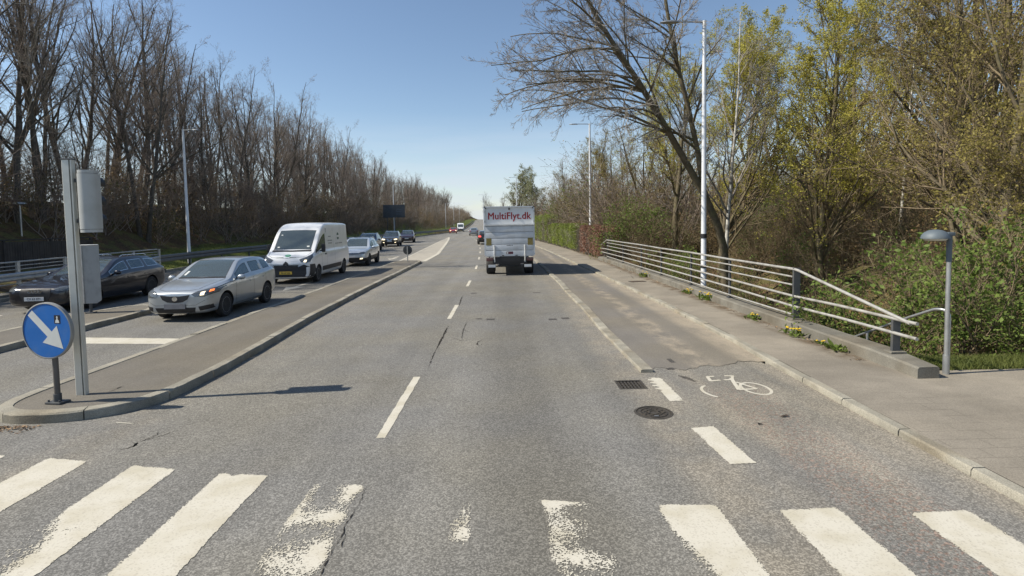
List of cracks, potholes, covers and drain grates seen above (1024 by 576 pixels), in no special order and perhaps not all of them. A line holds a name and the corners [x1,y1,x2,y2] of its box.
drain grate [614,380,648,390]
manhole cover [634,406,673,419]
crack [320,491,365,576]
